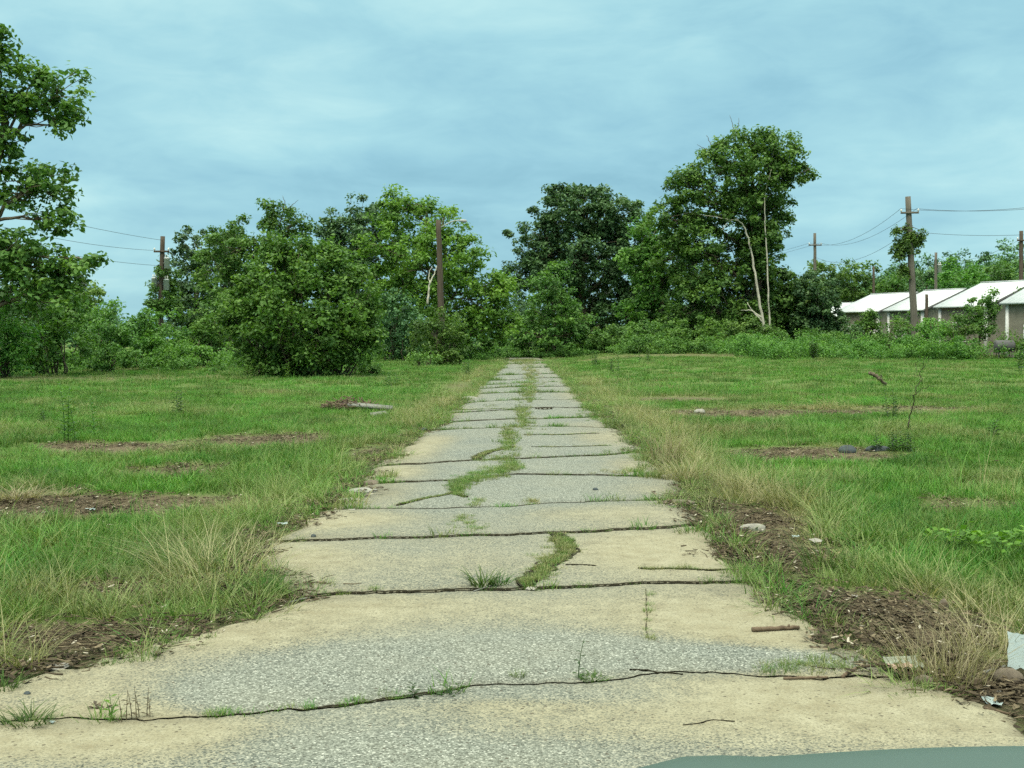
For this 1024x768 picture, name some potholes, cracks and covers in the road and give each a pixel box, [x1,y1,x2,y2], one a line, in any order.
crack [357,363,651,509]
crack [1,669,912,722]
crack [274,524,756,639]
